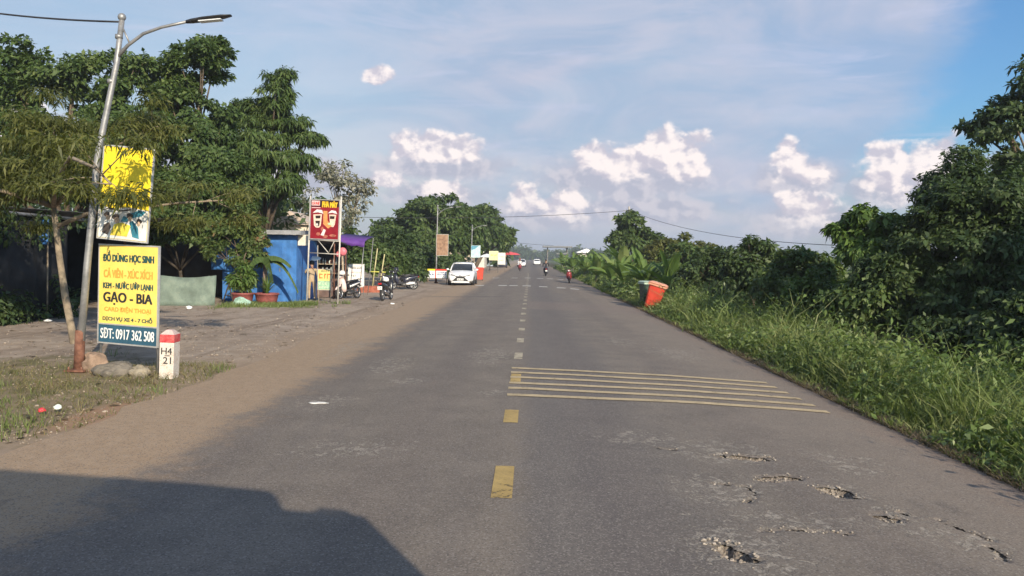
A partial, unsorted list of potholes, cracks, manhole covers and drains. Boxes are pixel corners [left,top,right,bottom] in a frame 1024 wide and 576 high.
pothole [807,484,865,499]
pothole [700,537,761,569]
pothole [709,452,776,462]
pothole [869,511,908,523]
pothole [753,473,809,483]
